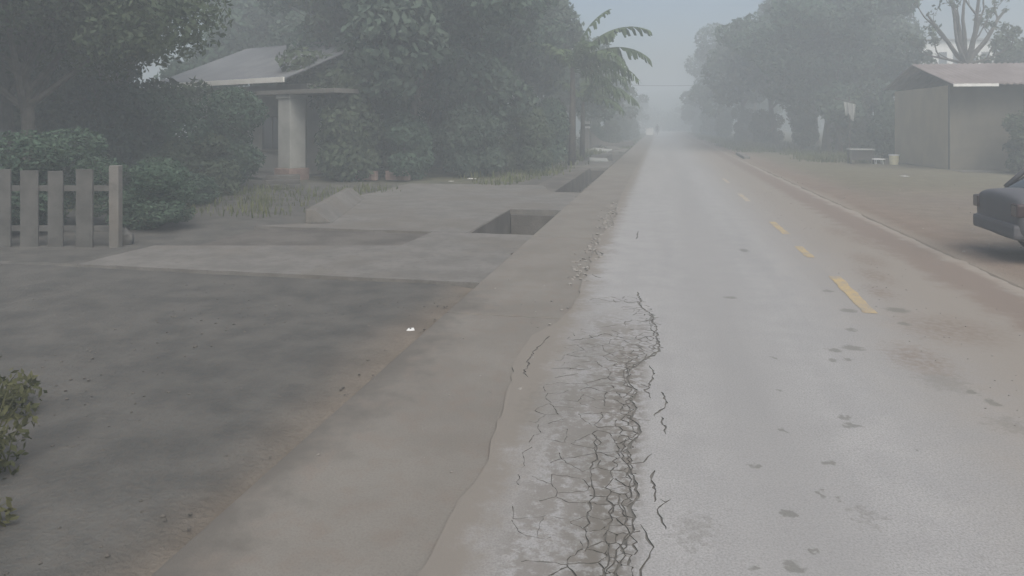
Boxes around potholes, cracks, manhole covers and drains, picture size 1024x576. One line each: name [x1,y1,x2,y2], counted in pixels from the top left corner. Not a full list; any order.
crack [523,336,550,377]
